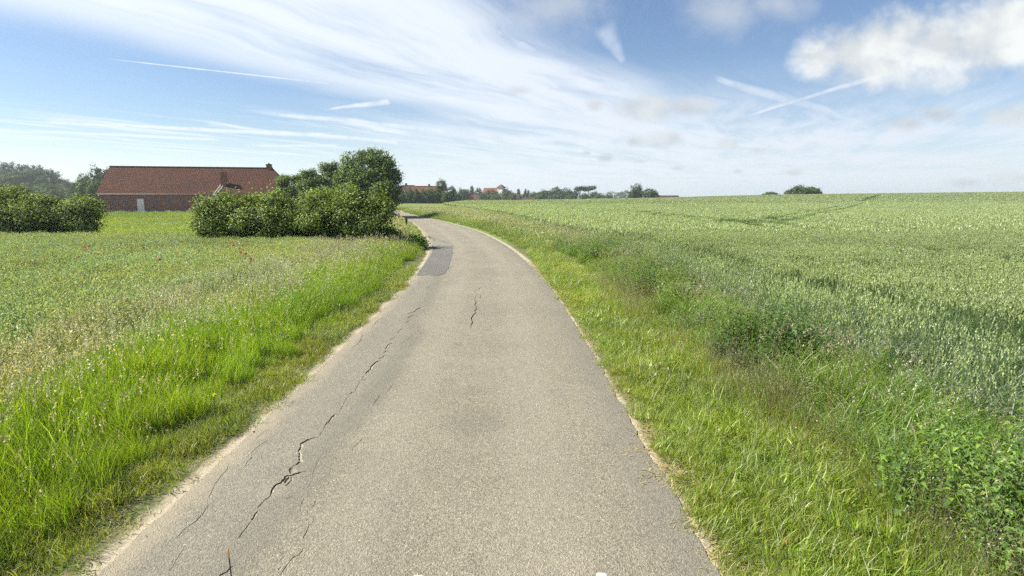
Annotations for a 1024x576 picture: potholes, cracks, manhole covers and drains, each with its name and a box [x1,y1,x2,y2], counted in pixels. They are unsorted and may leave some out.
crack [170,307,422,576]
